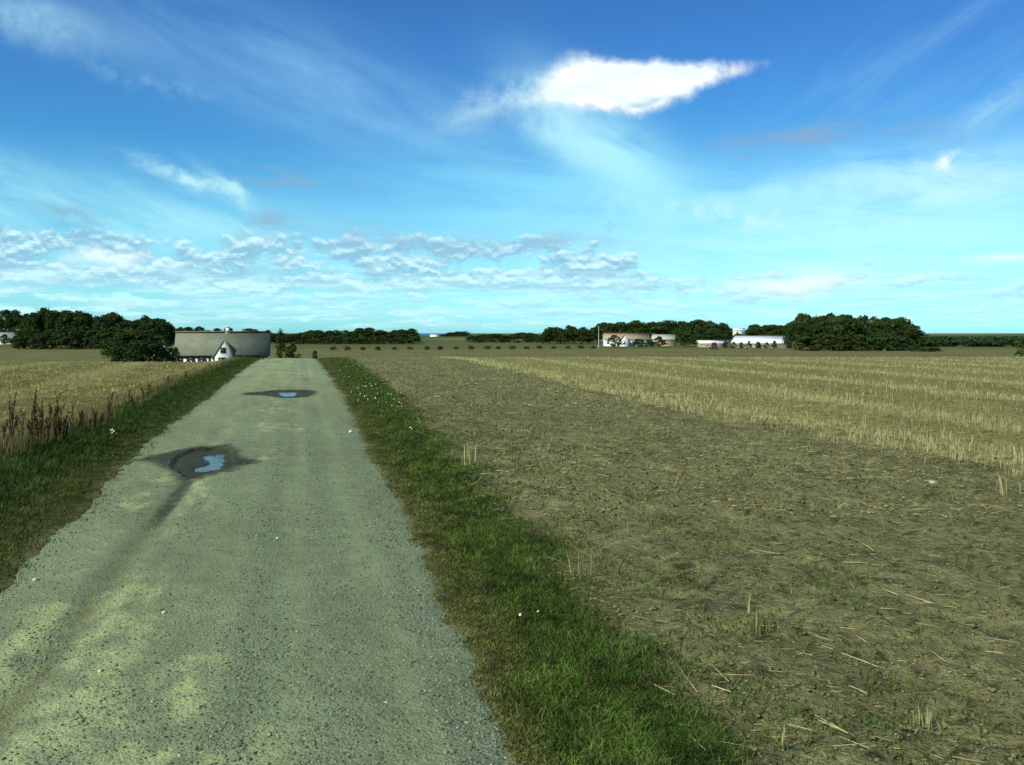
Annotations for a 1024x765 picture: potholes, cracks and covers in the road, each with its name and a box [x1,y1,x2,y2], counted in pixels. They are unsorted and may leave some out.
pothole [169,446,237,478]
pothole [265,390,314,398]
